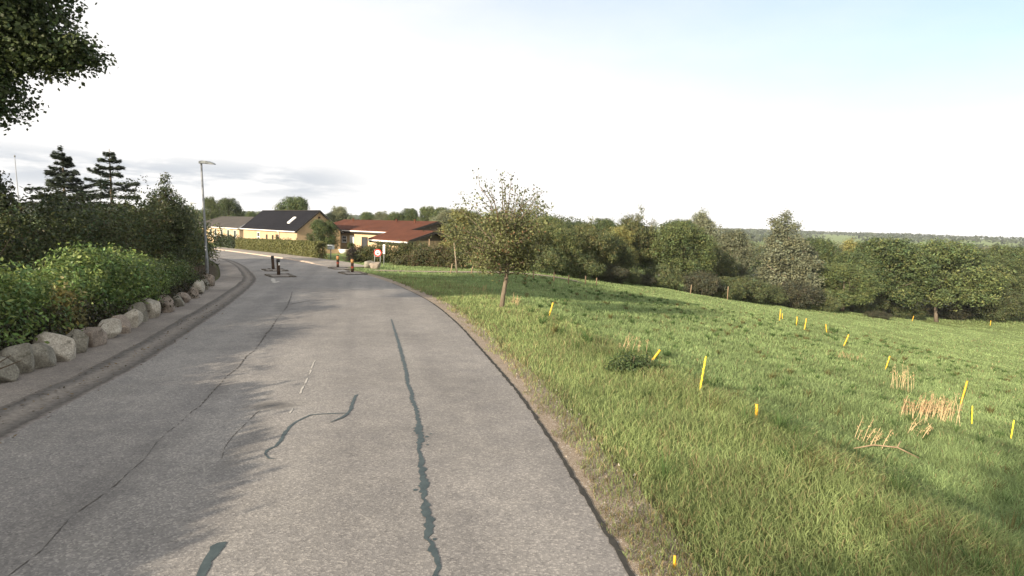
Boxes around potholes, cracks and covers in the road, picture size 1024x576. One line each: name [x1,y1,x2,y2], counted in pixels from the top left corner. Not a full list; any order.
crack [8,293,328,576]
